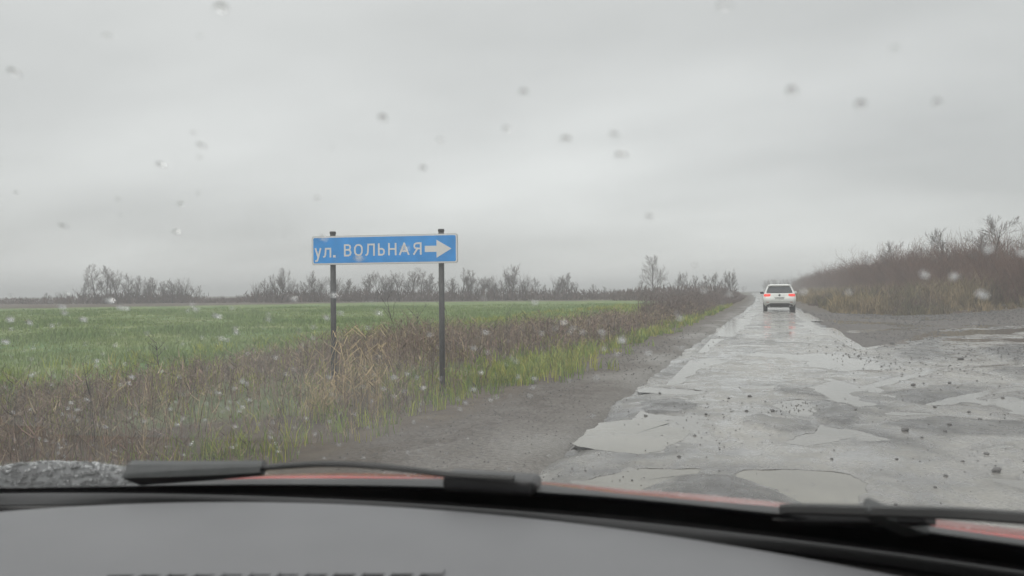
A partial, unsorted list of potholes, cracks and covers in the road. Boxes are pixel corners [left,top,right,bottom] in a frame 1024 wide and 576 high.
pothole [571,419,689,454]
pothole [735,469,868,504]
pothole [772,399,817,417]
